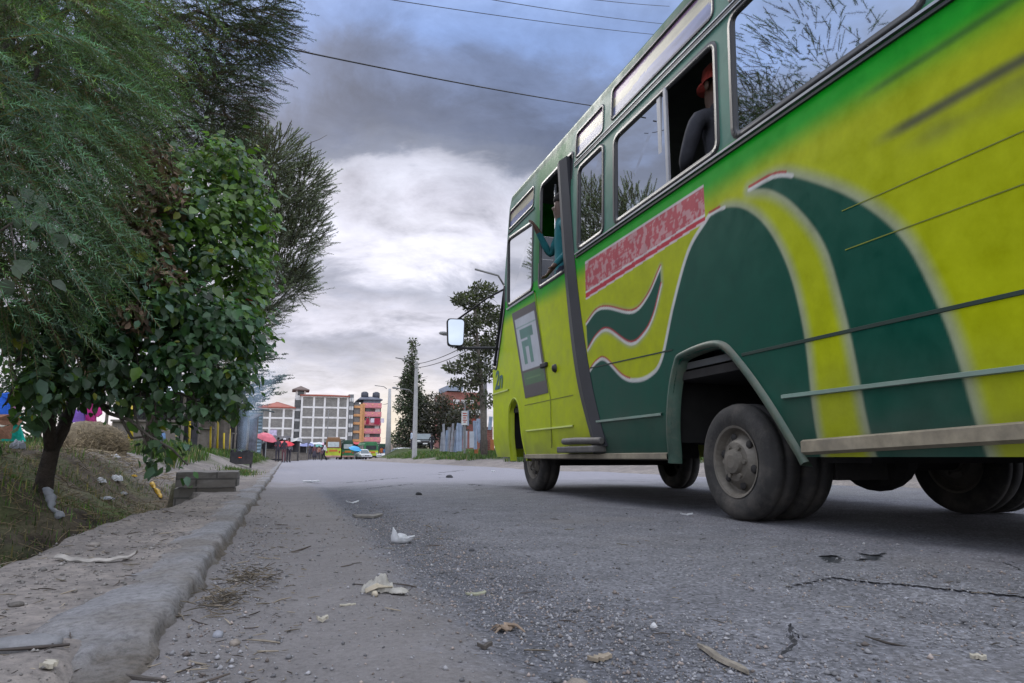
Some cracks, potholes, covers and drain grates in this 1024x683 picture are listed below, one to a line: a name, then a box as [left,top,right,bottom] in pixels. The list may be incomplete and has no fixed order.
pothole [856,553,887,561]
crack [776,623,804,657]
pothole [820,555,842,564]
